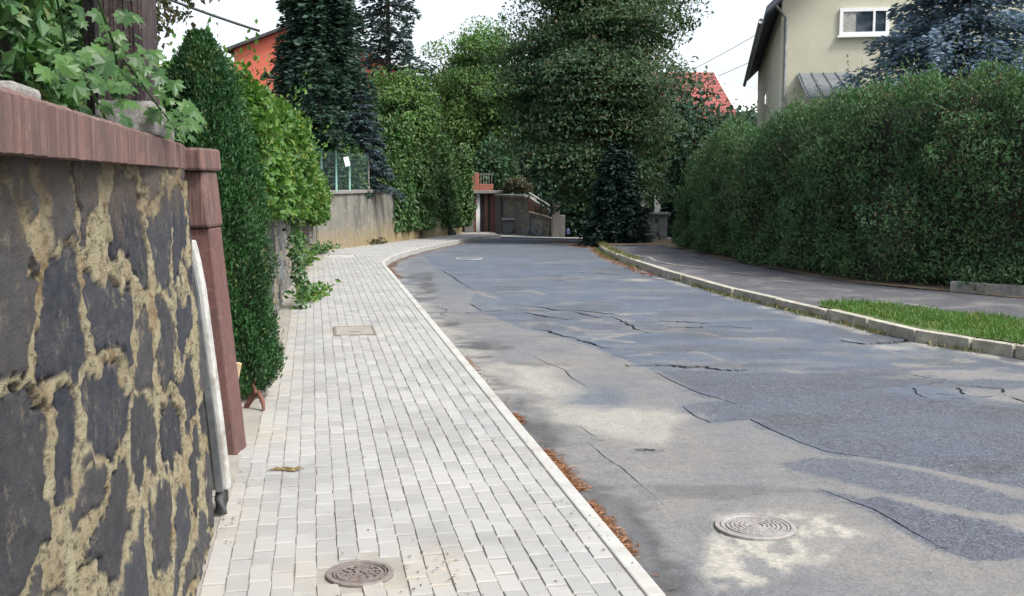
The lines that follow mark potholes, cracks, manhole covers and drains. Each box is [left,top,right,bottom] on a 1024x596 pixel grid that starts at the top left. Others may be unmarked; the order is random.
crack [810,487,951,549]
crack [422,304,1024,500]
manhole cover [714,513,796,541]
manhole cover [326,560,394,588]
utility cover [333,325,376,336]
